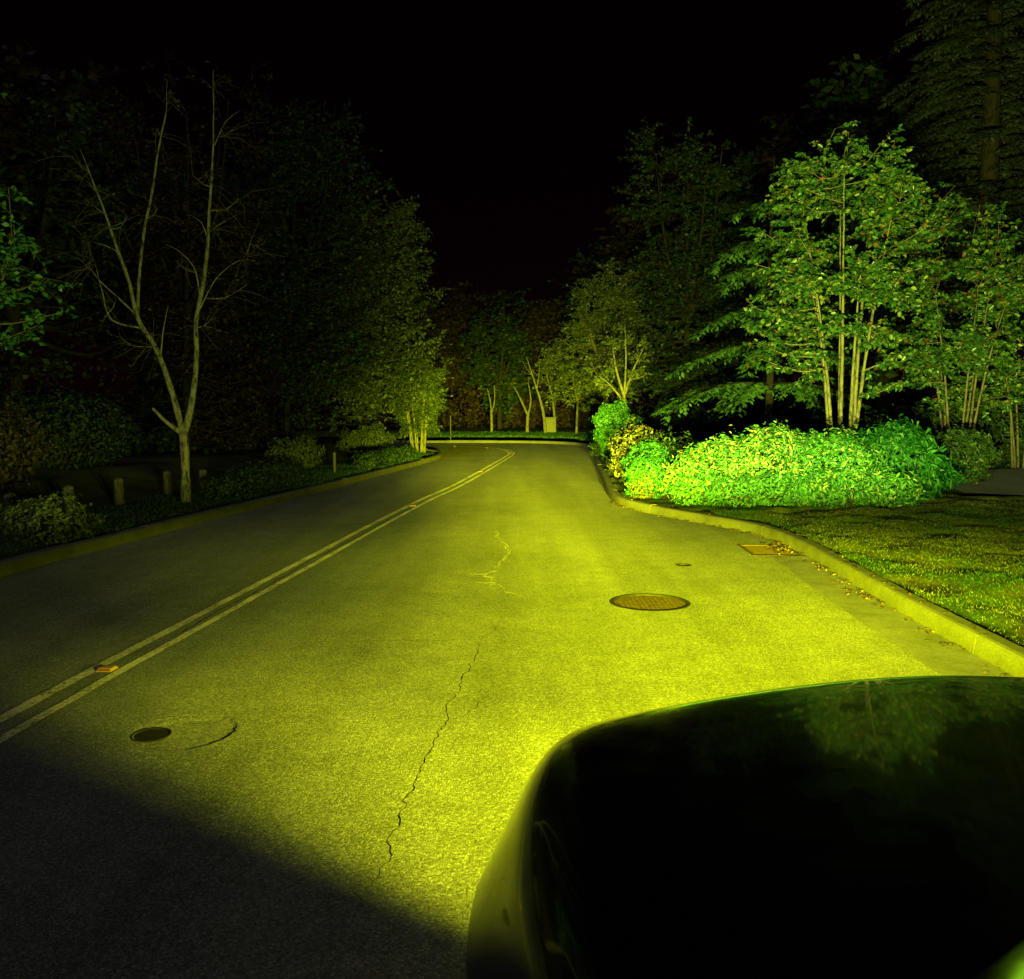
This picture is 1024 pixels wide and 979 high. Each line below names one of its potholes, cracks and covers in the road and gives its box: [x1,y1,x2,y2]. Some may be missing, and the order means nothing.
drain grate [737,544,803,556]
utility cover [130,727,172,743]
crack [227,628,496,900]
manhole cover [609,594,691,611]
crack [478,530,521,598]
